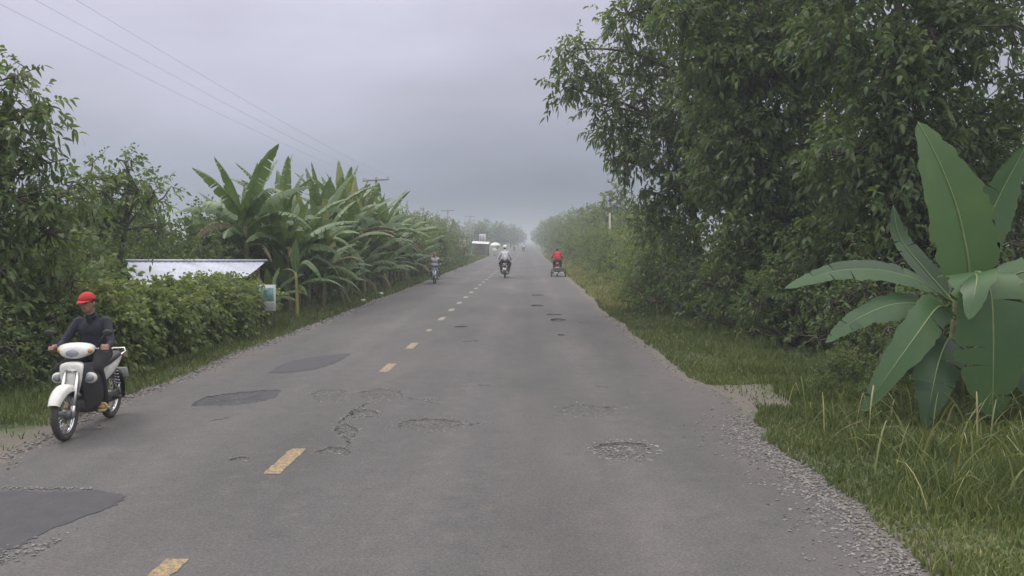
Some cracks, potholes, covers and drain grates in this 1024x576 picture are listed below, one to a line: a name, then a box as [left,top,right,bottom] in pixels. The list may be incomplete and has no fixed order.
pothole [385,416,469,433]
pothole [580,439,663,463]
crack [326,402,378,449]
pothole [305,388,354,403]
pothole [553,403,628,420]
pothole [349,386,413,401]
